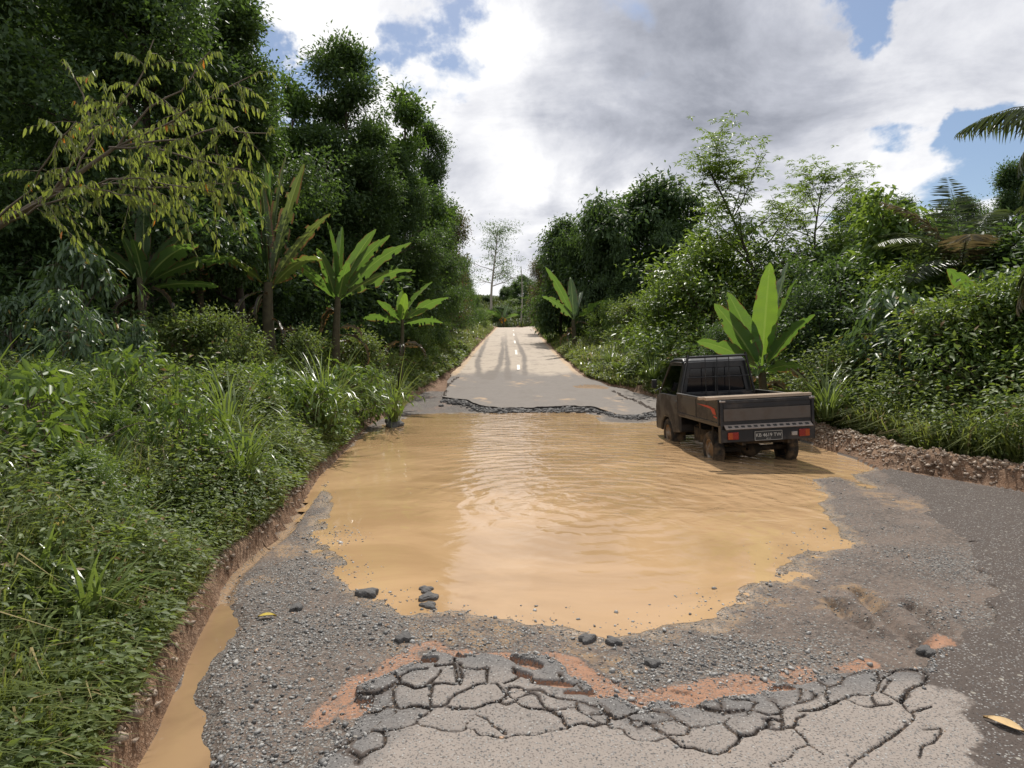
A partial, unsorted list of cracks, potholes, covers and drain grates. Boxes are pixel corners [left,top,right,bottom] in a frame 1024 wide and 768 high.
crack [332,658,943,768]
crack [612,390,656,411]
pothole [146,391,1024,768]
